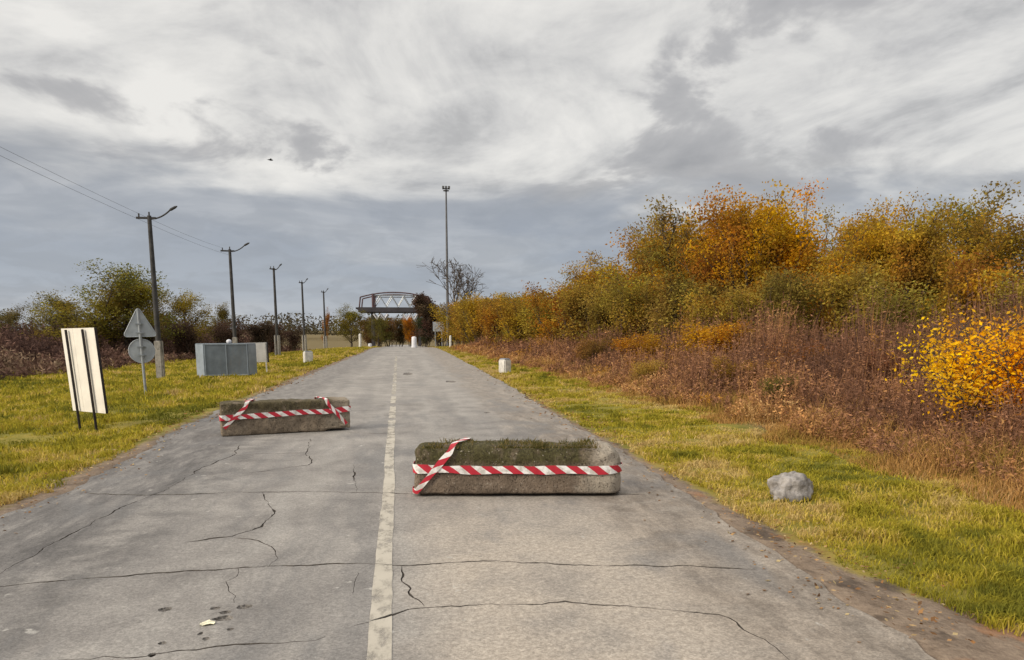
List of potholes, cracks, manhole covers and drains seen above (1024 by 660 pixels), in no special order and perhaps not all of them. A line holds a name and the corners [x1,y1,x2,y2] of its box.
crack [0,440,788,659]
